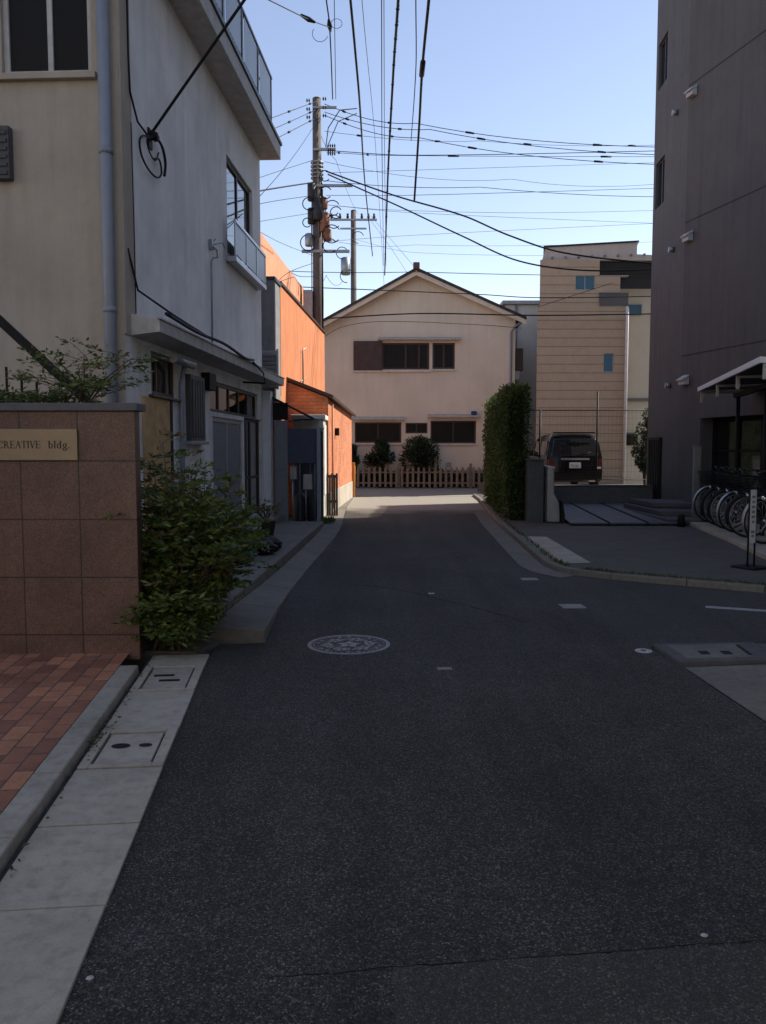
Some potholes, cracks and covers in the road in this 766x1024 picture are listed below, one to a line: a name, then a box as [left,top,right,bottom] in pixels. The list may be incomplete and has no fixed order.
manhole cover [307,635,390,654]
